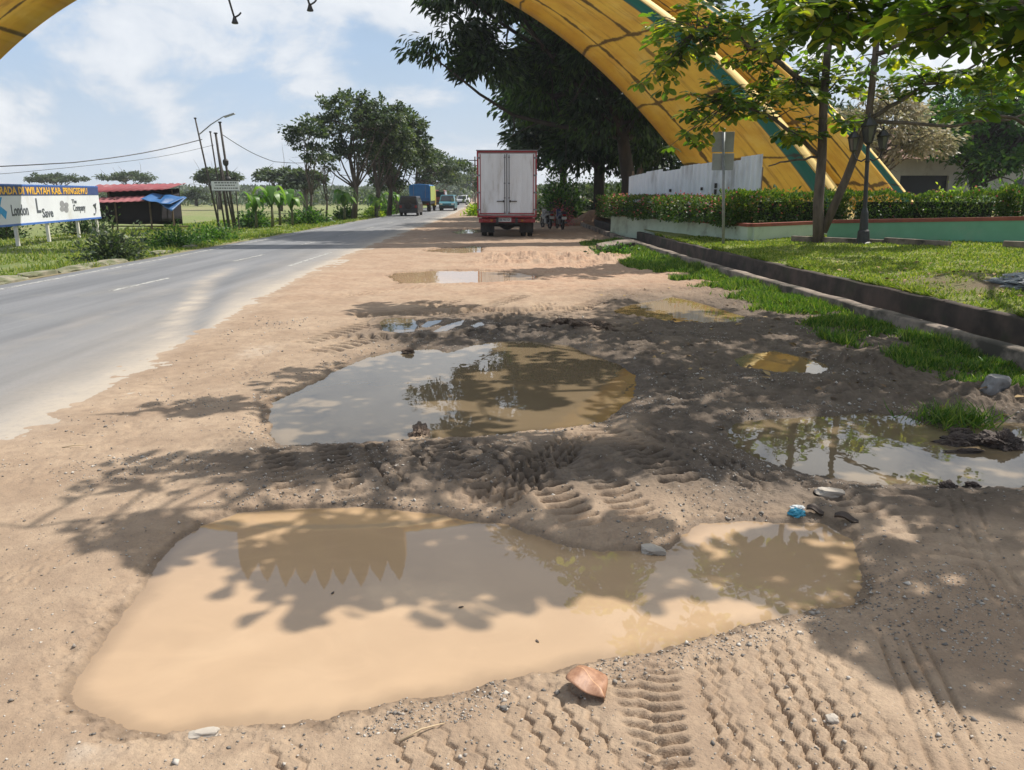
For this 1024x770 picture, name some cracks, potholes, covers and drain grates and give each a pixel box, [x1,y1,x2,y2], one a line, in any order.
pothole [376,315,420,333]
pothole [258,337,643,446]
pothole [385,269,543,284]
pothole [611,295,748,323]
pothole [715,408,1024,490]
pothole [730,347,834,374]
pothole [417,317,445,327]
pothole [51,498,879,744]
pothole [428,318,467,332]
